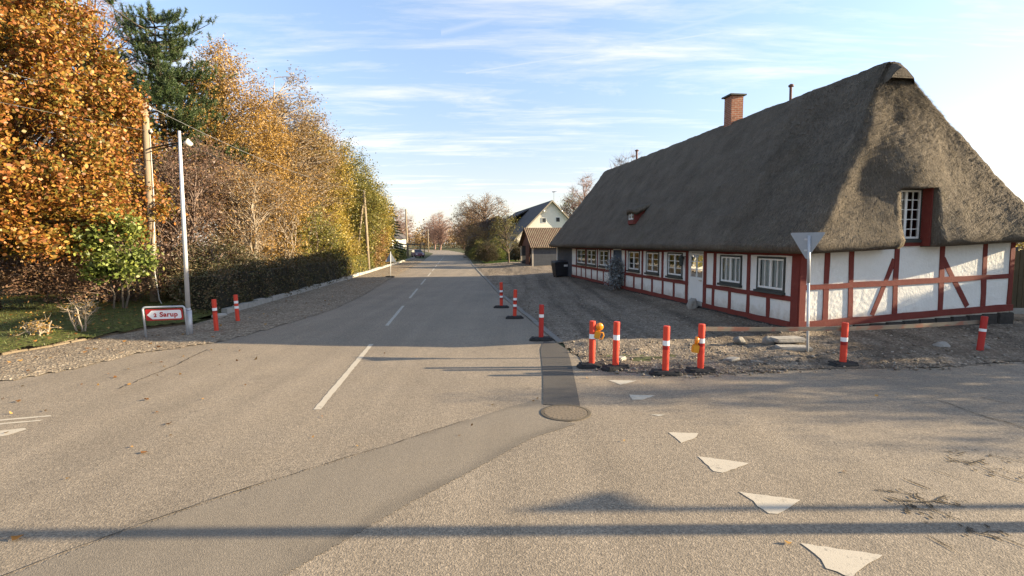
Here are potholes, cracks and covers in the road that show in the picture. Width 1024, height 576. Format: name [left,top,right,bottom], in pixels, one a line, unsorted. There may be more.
crack [874,446,1024,554]
manhole cover [541,404,591,421]
